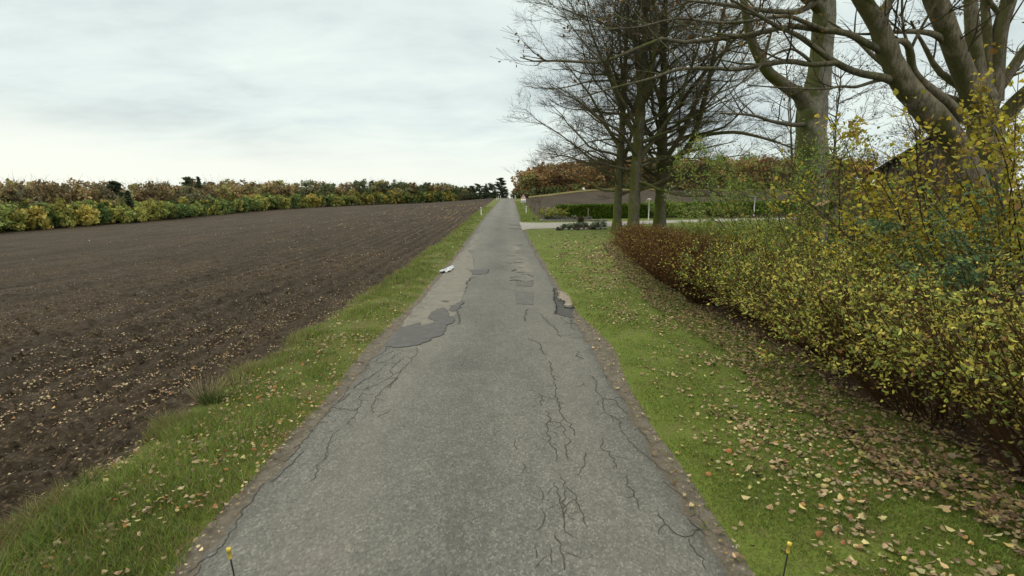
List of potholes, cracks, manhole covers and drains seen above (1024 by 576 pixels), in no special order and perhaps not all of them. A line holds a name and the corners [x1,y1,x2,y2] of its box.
crack [514,309,707,570]
pothole [553,288,575,318]
crack [189,347,418,576]
